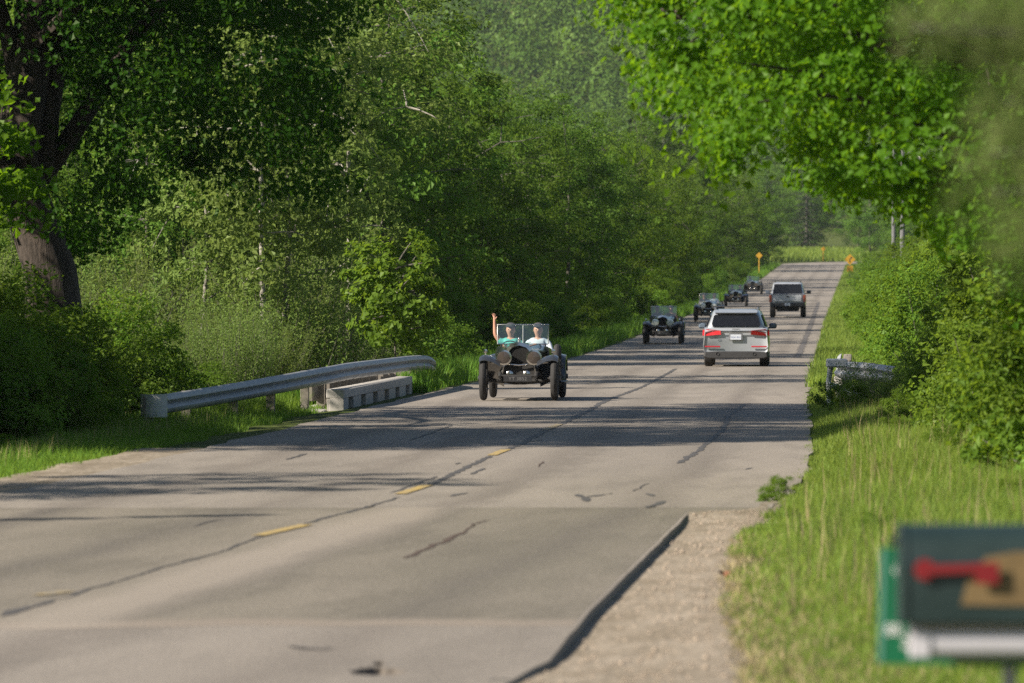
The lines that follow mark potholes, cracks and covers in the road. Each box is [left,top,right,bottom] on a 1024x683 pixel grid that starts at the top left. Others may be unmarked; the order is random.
crack [574,493,611,502]
crack [677,404,750,469]
crack [403,520,486,558]
crack [633,483,666,507]
